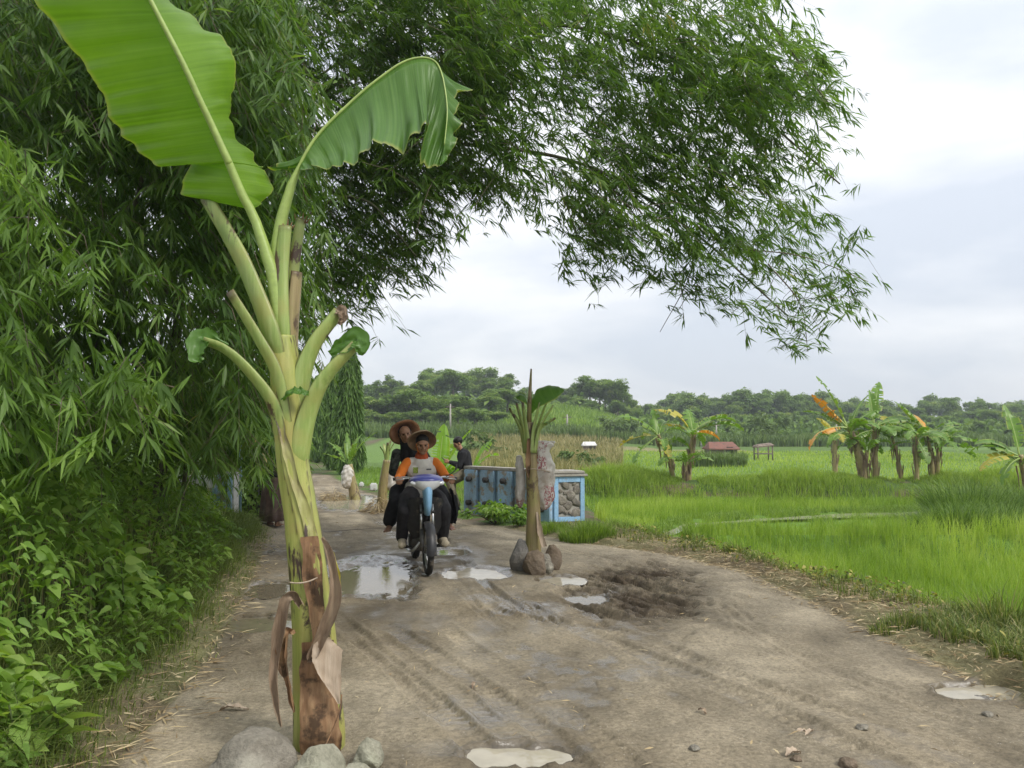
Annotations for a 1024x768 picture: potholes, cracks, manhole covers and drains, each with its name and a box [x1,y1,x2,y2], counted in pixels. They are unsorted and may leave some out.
pothole [530,552,736,645]
pothole [931,665,1024,701]
pothole [439,564,514,580]
pothole [327,552,425,601]
pothole [457,737,573,768]
